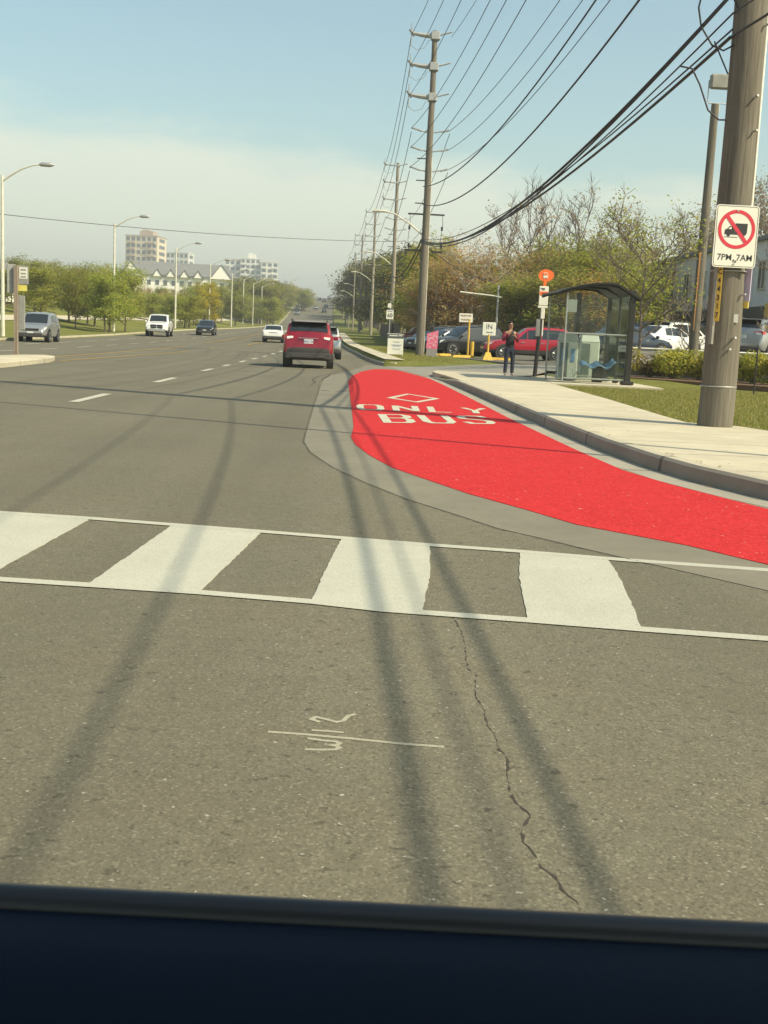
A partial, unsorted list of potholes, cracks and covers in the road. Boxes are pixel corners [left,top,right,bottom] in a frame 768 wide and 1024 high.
crack [453,617,579,905]
